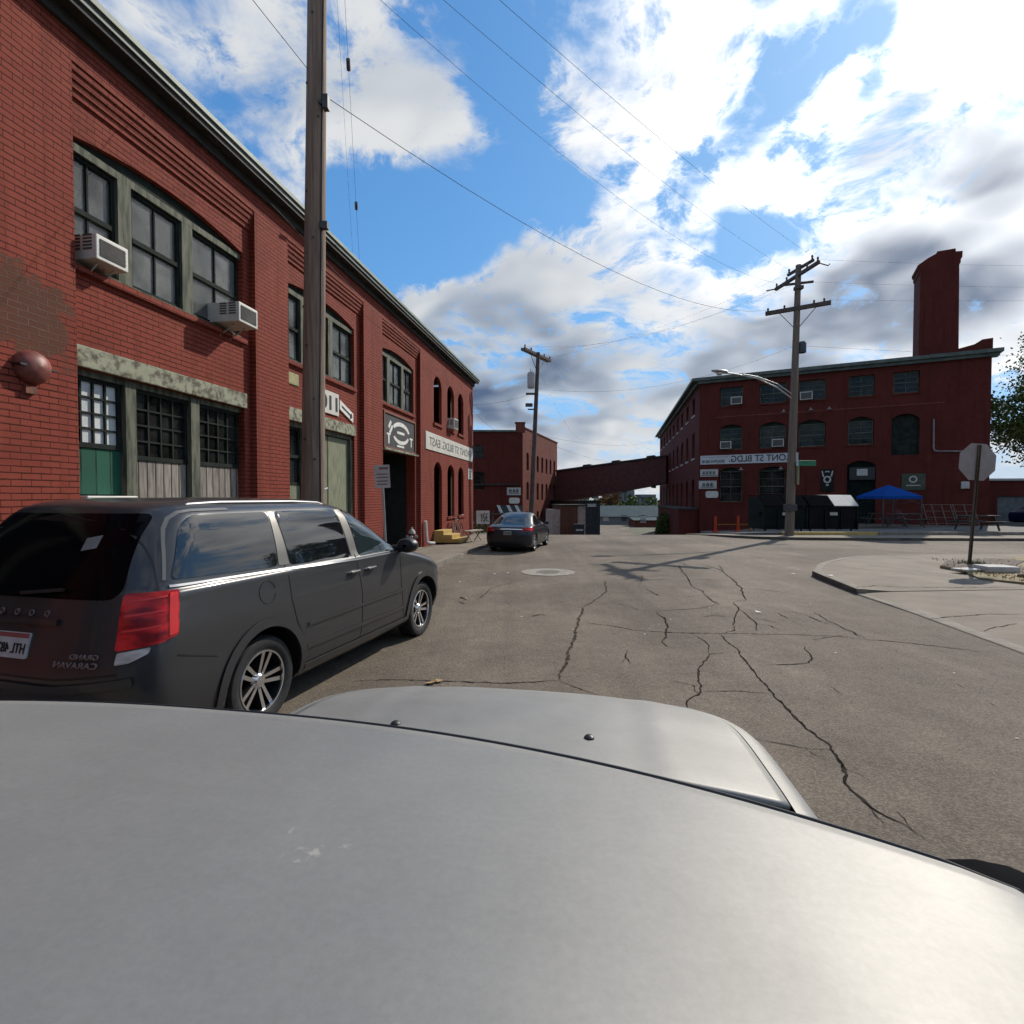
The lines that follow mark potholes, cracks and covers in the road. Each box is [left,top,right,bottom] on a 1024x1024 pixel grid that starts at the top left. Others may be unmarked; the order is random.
crack [585,566,990,838]
manhole cover [521,568,575,576]
crack [359,679,599,695]
